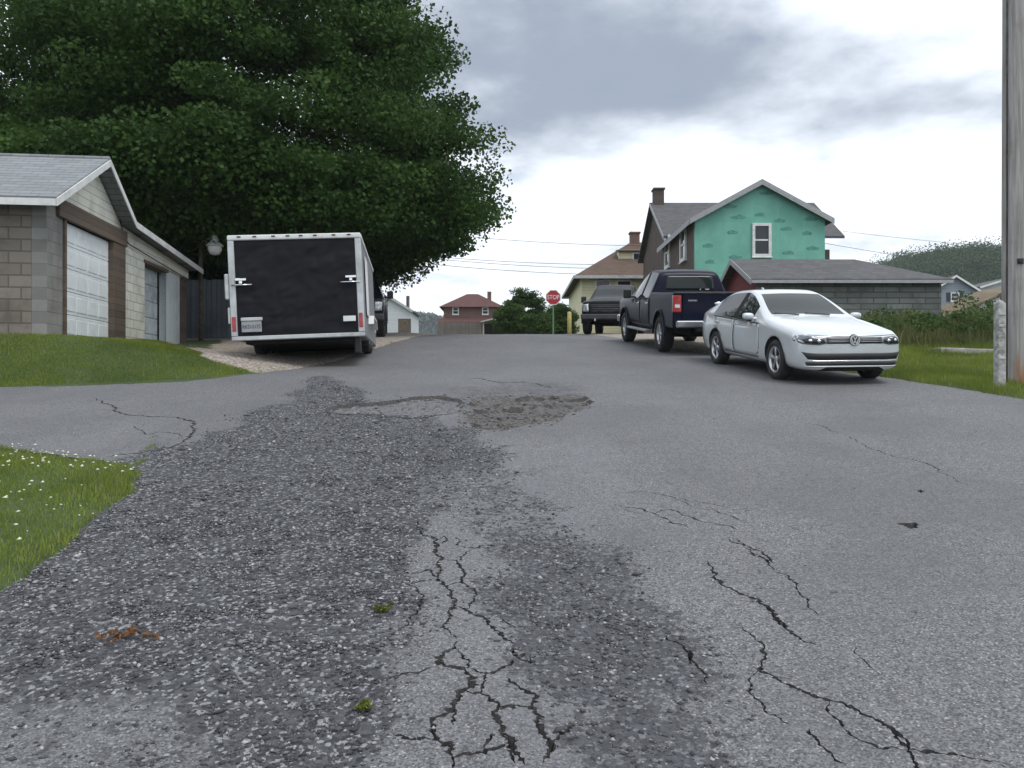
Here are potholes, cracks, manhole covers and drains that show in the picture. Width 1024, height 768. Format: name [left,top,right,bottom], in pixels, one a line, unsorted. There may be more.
pothole [466,394,594,430]
crack [815,424,968,485]
crack [388,521,575,768]
crack [615,491,1006,768]
crack [96,398,197,458]
pothole [324,396,465,417]
